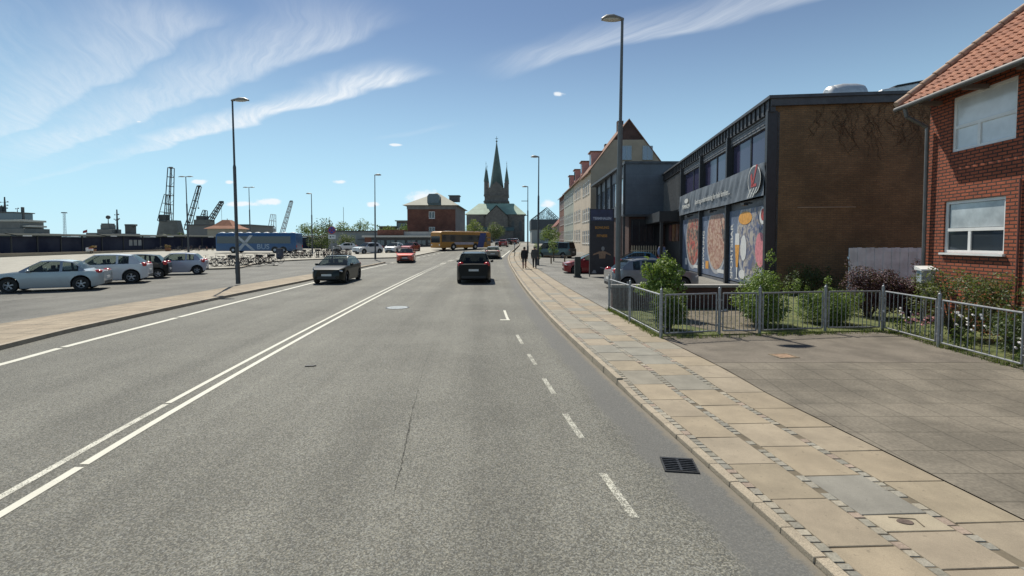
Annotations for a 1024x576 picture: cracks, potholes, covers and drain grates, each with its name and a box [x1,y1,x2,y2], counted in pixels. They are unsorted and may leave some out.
utility cover [888,516,925,527]
drain grate [660,456,700,474]
